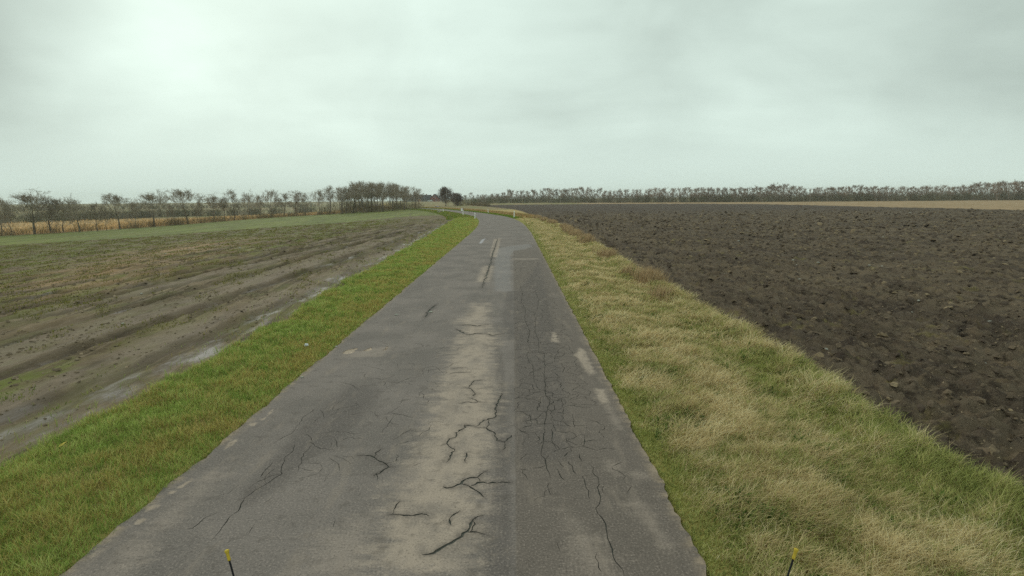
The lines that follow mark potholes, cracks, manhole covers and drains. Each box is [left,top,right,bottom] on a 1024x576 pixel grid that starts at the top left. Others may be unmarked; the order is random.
crack [392,262,631,573]
crack [191,344,454,534]
